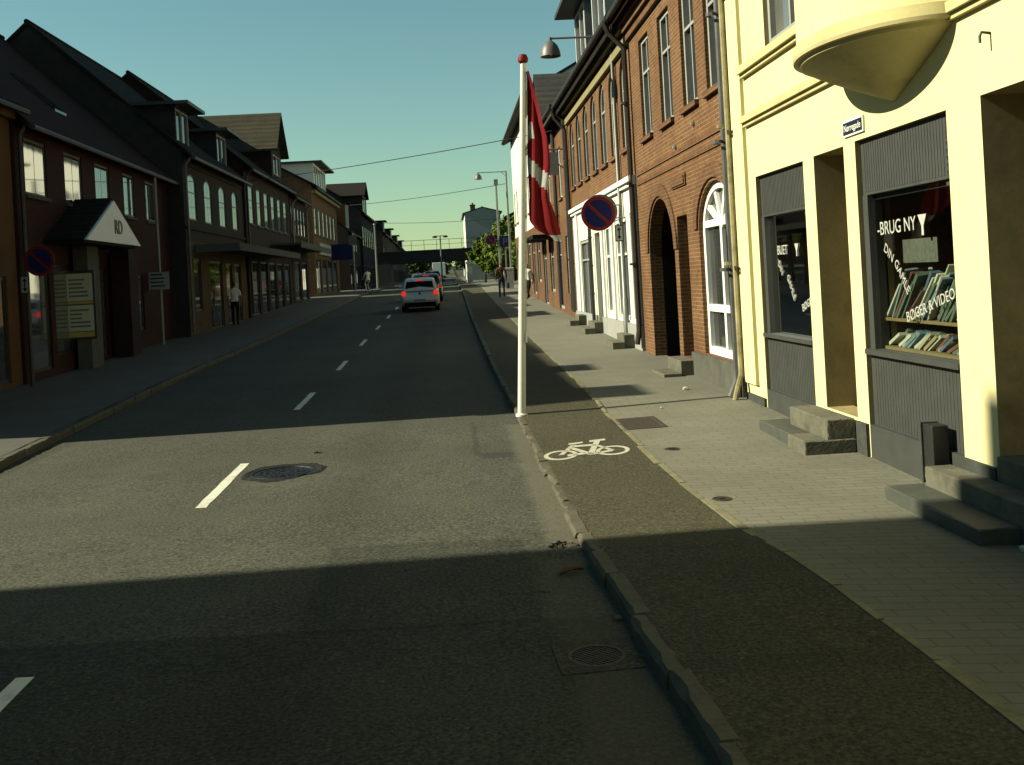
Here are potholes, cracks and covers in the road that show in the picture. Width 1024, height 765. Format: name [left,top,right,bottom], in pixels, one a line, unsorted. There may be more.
drain grate [550,637,647,676]
manhole cover [609,416,668,431]
manhole cover [241,463,327,483]
